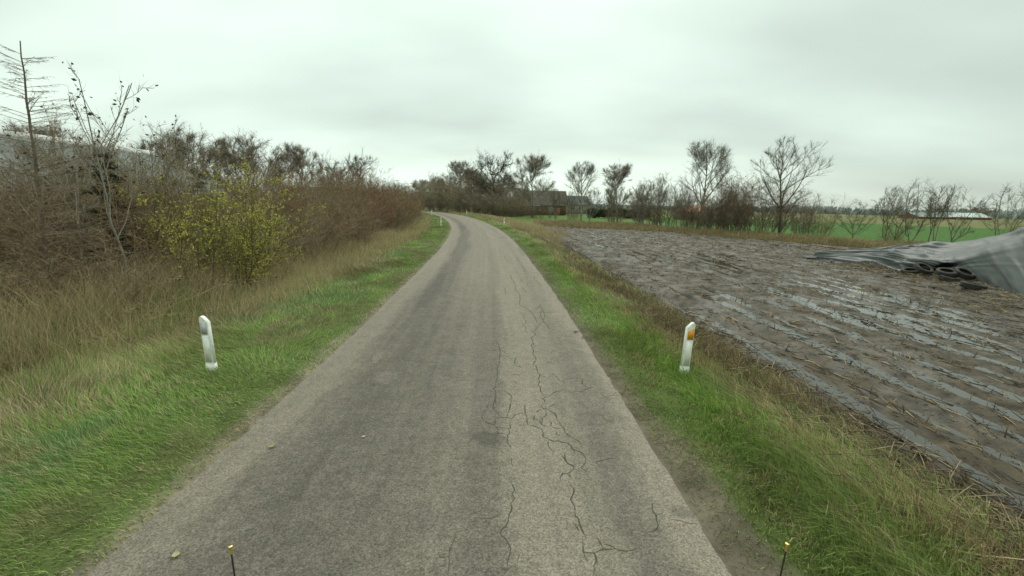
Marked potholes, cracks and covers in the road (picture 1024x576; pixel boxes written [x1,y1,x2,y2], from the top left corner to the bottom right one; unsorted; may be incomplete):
crack [479,257,695,576]
